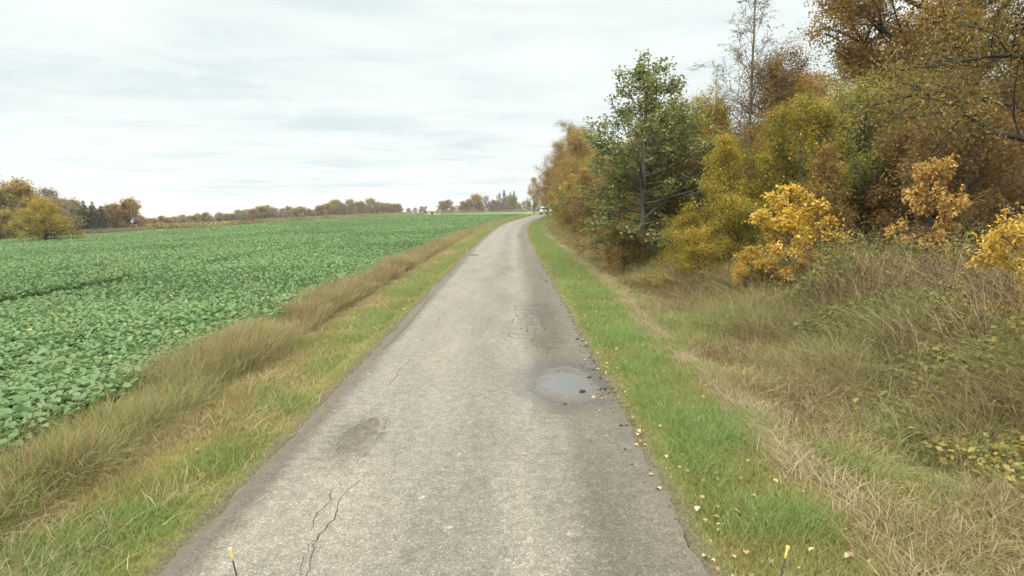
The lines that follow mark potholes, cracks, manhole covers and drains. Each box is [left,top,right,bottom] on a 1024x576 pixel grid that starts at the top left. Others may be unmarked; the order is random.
pothole [526,367,604,404]
crack [299,421,386,576]
crack [371,296,447,388]
crack [508,304,561,354]
